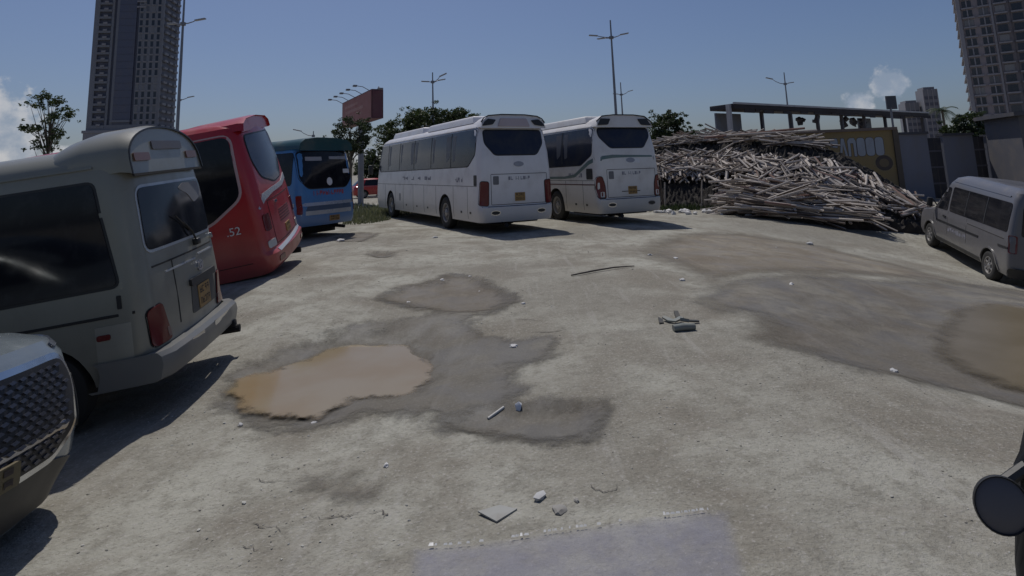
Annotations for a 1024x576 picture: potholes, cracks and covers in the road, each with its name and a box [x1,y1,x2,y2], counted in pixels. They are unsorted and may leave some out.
pothole [227,343,434,420]
pothole [940,303,1024,391]
pothole [439,397,609,444]
pothole [379,275,520,312]
